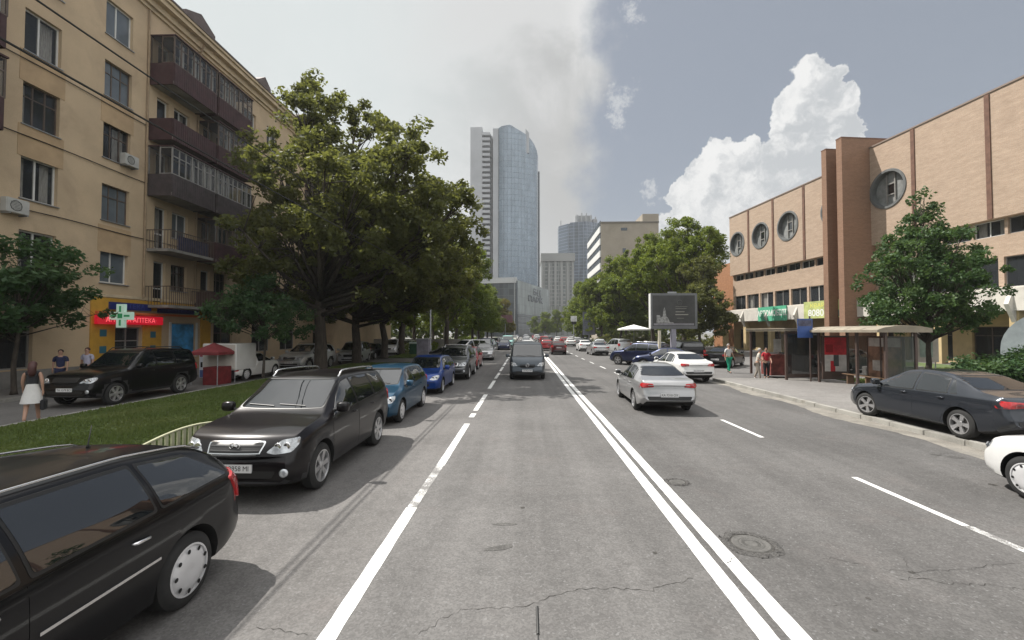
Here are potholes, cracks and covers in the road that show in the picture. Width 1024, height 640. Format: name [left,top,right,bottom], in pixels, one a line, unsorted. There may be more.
manhole cover [719,530,785,559]
crack [890,559,1020,589]
manhole cover [664,478,691,486]
crack [418,578,688,635]
